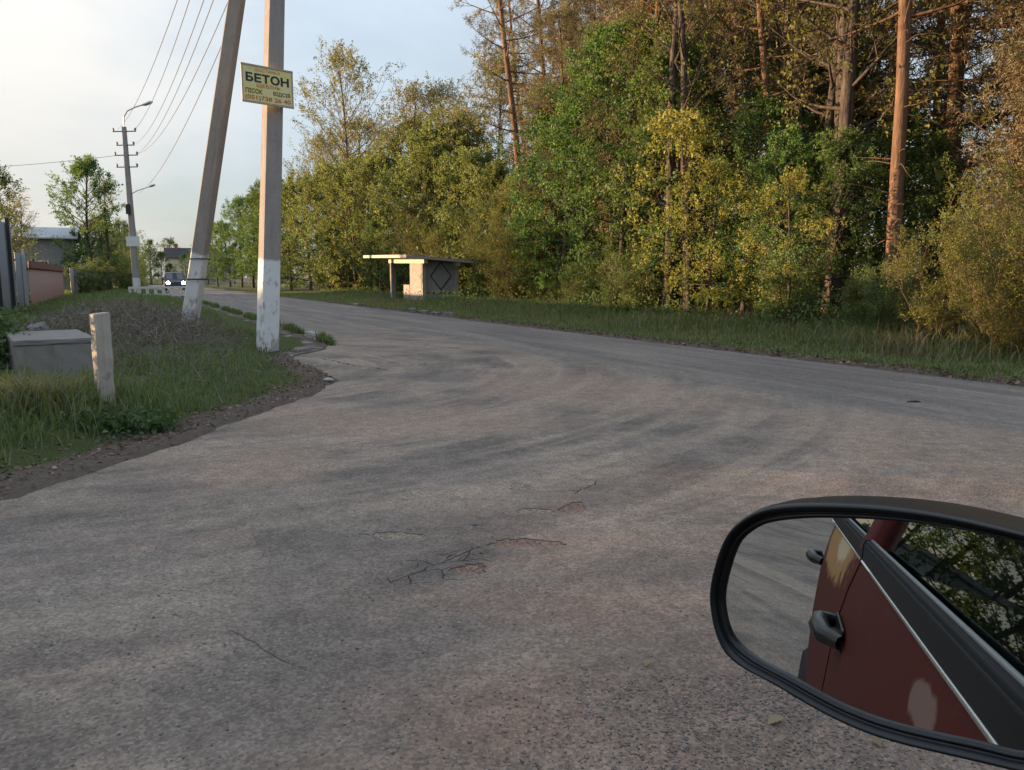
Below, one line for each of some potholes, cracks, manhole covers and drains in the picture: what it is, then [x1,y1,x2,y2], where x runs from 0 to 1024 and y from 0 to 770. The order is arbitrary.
crack [387,545,494,585]
pothole [487,538,566,547]
pothole [448,563,487,574]
crack [227,629,306,670]
pothole [557,501,586,513]
